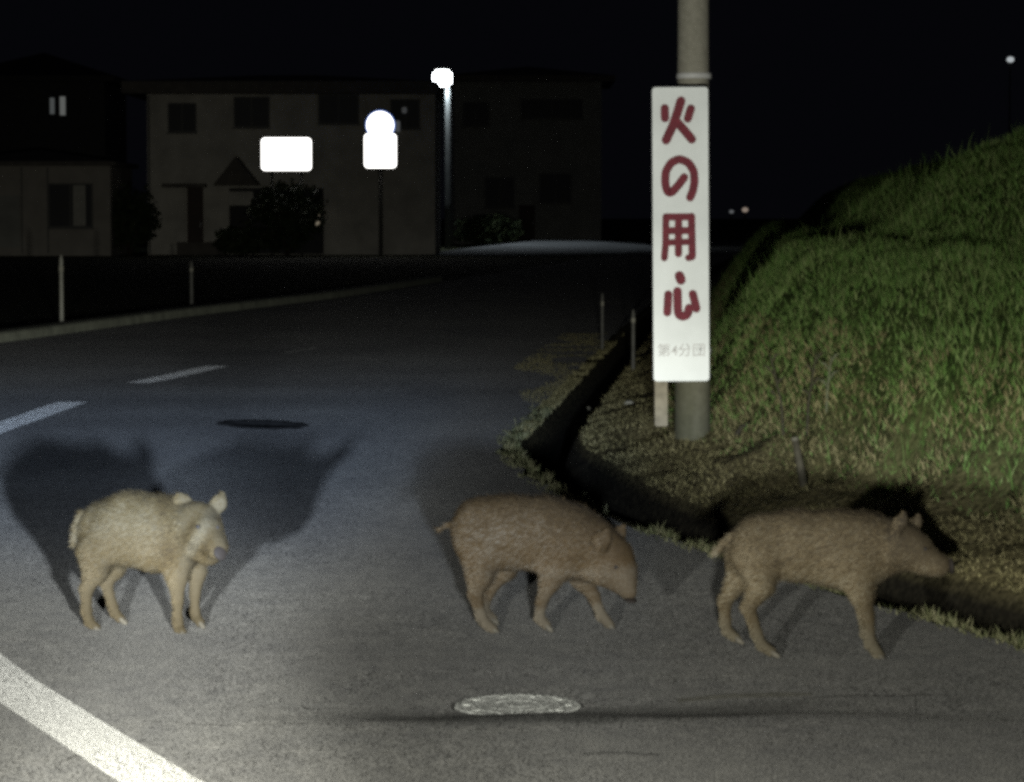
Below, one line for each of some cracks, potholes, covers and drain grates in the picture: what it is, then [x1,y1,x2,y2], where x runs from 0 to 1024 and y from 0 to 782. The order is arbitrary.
manhole cover [451,694,584,714]
